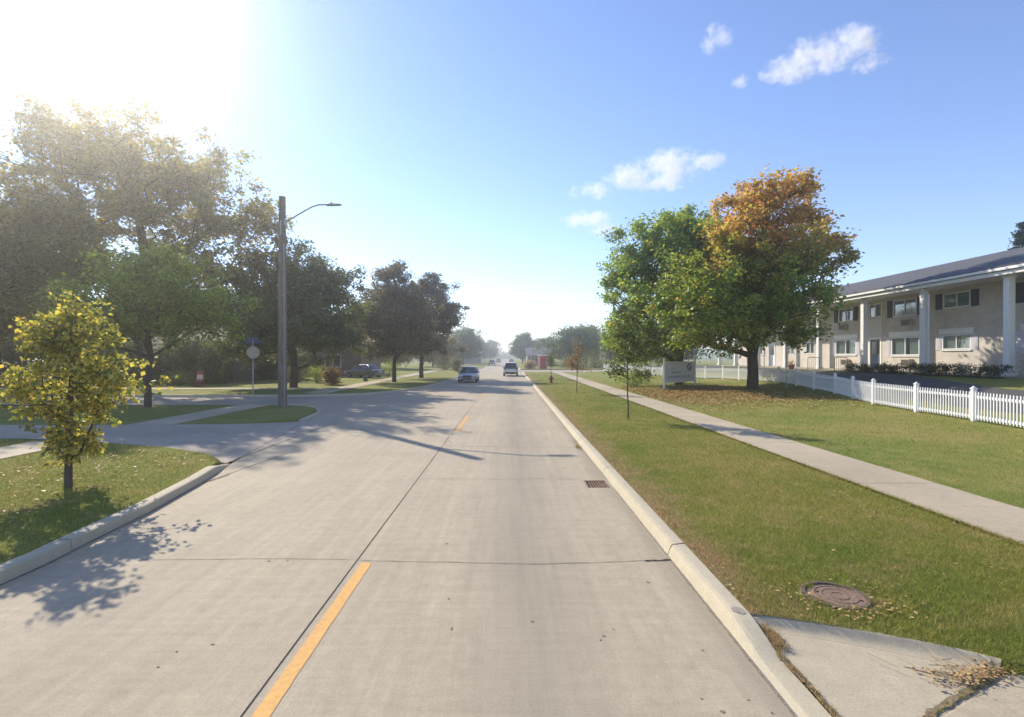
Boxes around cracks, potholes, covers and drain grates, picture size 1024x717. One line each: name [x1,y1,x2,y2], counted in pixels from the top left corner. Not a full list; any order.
manhole cover [800,581,872,611]
drain grate [584,480,610,488]
